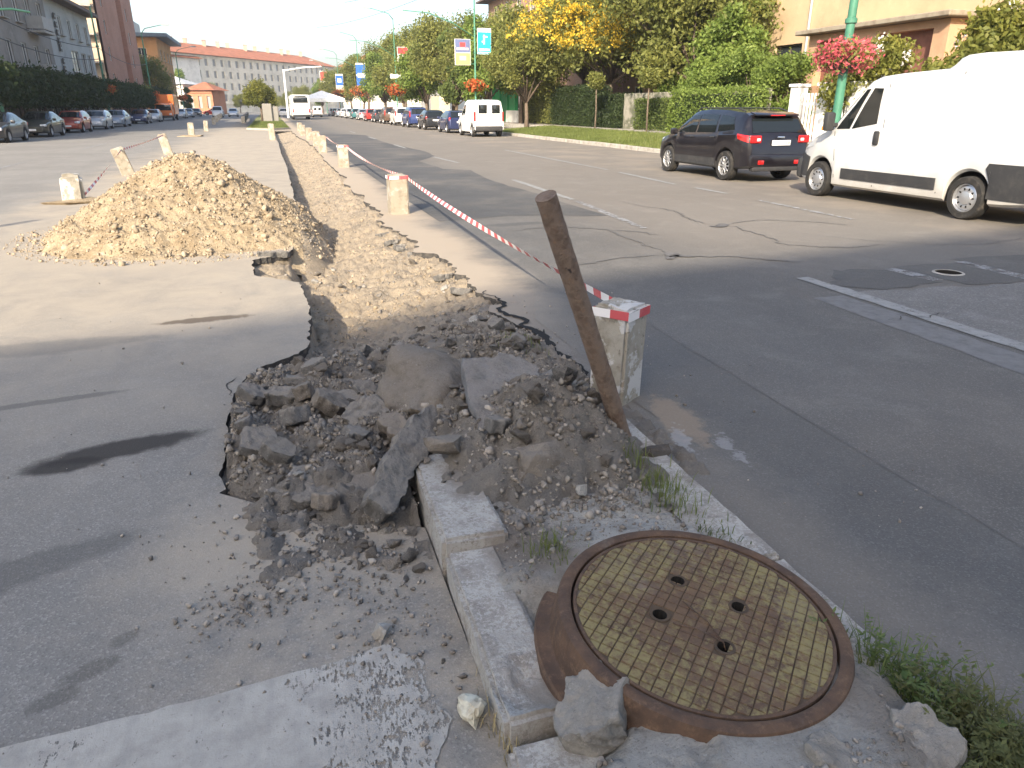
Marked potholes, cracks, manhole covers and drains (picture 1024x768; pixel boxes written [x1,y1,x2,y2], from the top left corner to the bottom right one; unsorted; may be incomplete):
manhole cover [534,530,855,743]
